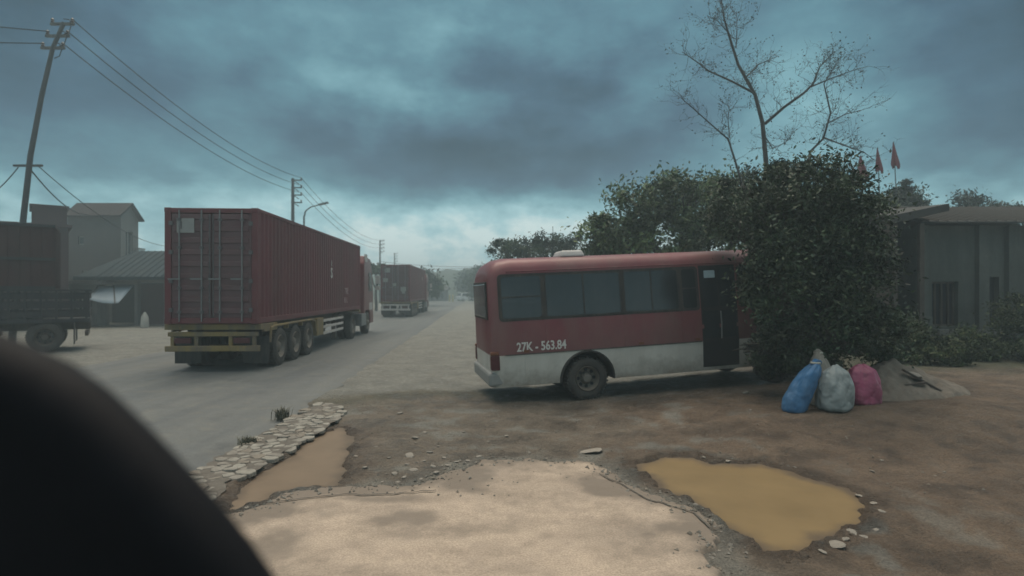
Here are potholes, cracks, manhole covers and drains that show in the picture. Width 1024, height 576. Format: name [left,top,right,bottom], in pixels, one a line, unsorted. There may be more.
pothole [628,450,888,565]
pothole [217,425,366,514]
crack [599,473,711,527]
